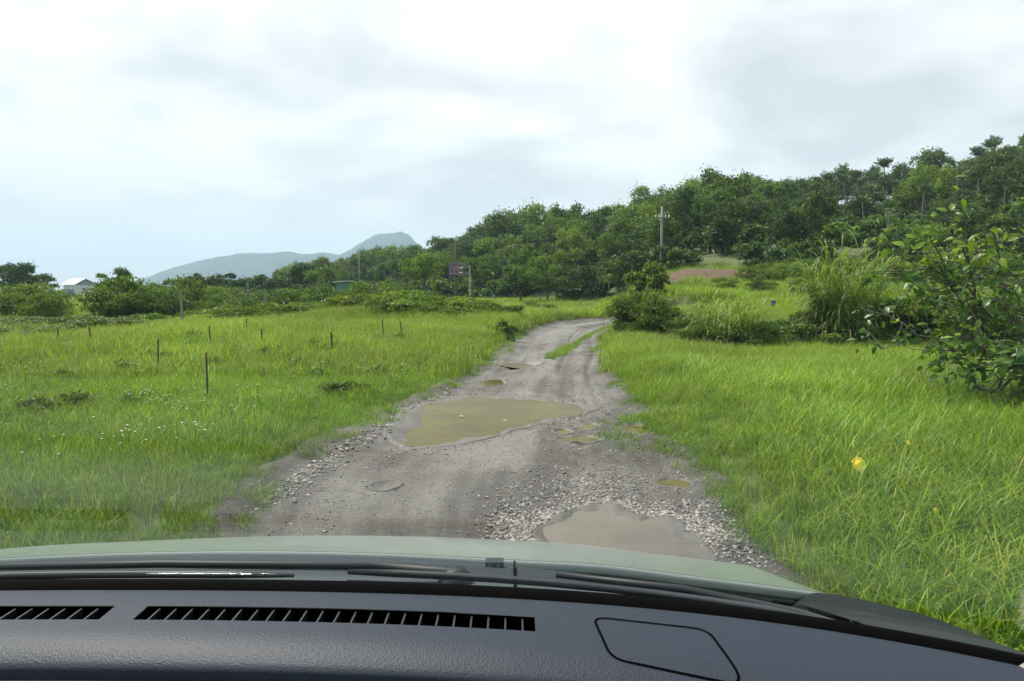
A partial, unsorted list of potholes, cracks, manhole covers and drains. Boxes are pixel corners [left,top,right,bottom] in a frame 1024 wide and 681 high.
pothole [496,361,546,371]
pothole [382,395,602,449]
pothole [367,480,404,492]
pothole [619,422,653,436]
pothole [652,478,698,489]
pothole [470,379,509,387]
pothole [532,503,719,561]
